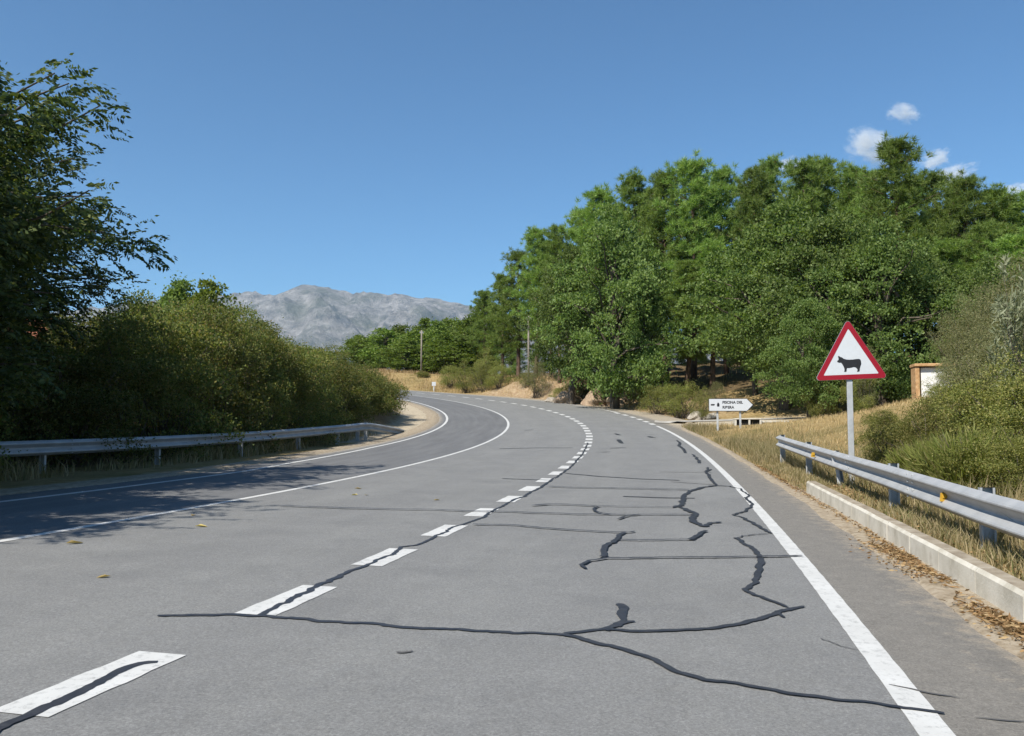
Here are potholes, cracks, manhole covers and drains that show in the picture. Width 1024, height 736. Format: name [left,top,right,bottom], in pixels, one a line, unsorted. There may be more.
crack [890,684,960,698]
crack [566,473,714,498]
